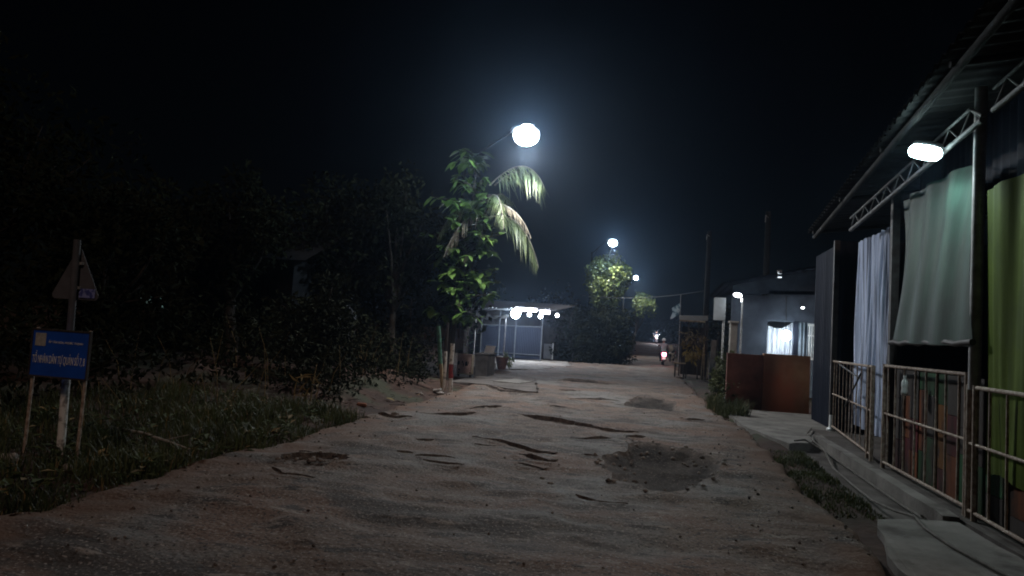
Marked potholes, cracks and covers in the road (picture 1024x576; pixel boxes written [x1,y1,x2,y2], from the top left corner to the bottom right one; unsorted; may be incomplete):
pothole [613,395,686,412]
pothole [266,450,361,471]
pothole [587,440,739,494]
